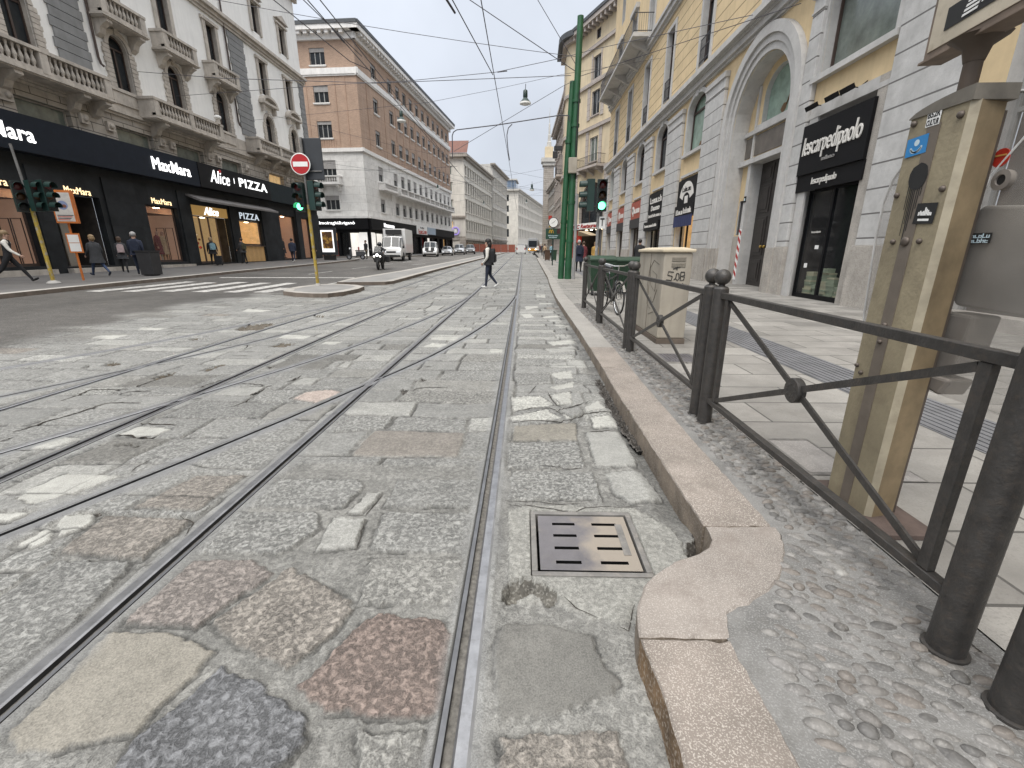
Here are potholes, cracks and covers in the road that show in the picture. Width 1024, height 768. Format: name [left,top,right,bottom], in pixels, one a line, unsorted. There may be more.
crack [509,501,644,512]
pothole [502,580,557,608]
crack [2,380,155,441]
